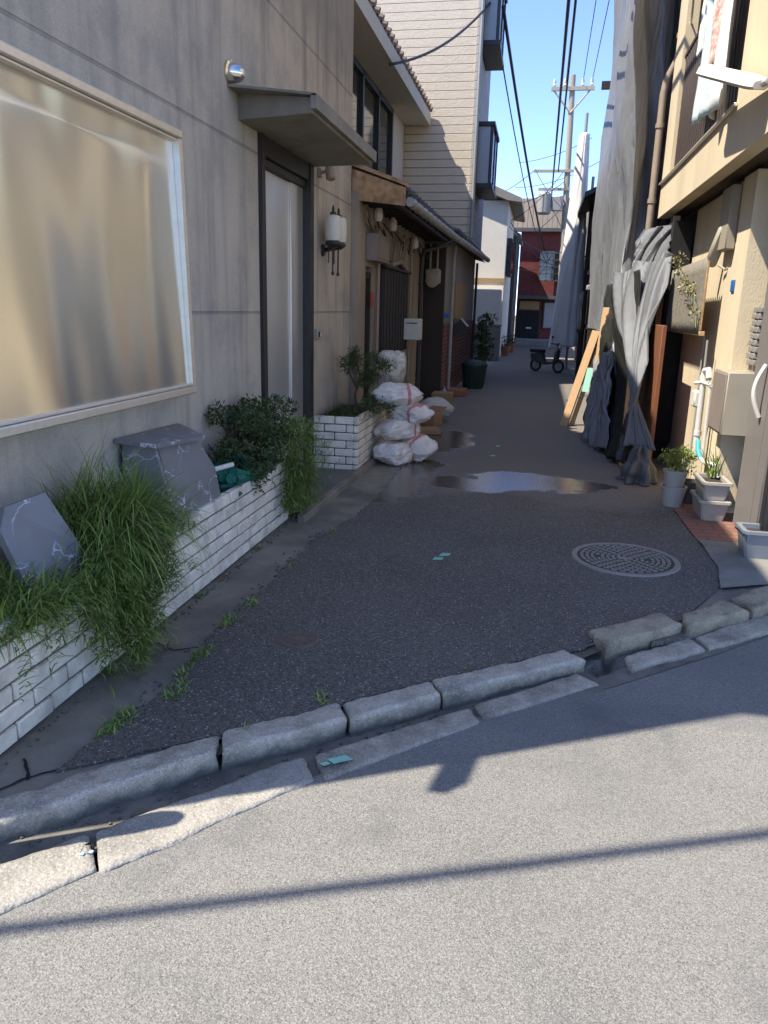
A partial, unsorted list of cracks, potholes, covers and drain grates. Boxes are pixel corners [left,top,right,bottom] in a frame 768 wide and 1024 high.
manhole cover [278,630,320,648]
manhole cover [571,542,681,577]
crack [0,758,57,790]
